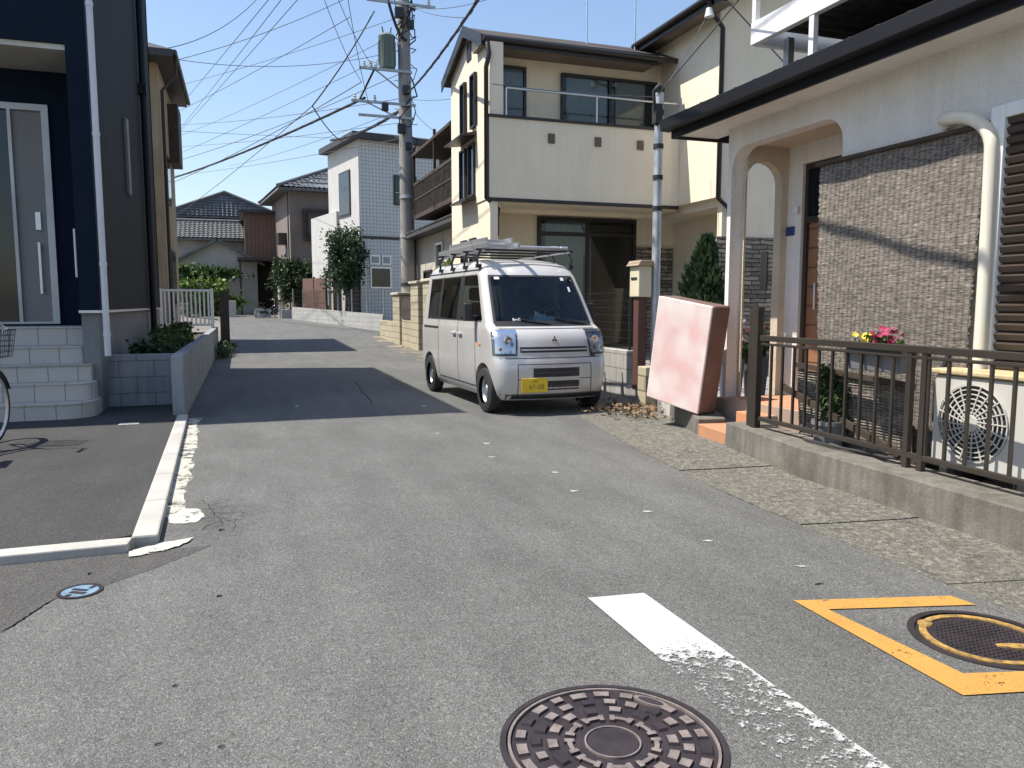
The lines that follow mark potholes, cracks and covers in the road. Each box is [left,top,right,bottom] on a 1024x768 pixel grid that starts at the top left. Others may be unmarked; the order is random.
manhole cover [500,685,730,768]
crack [201,499,249,531]
manhole cover [907,610,1024,671]
manhole cover [56,583,104,600]
